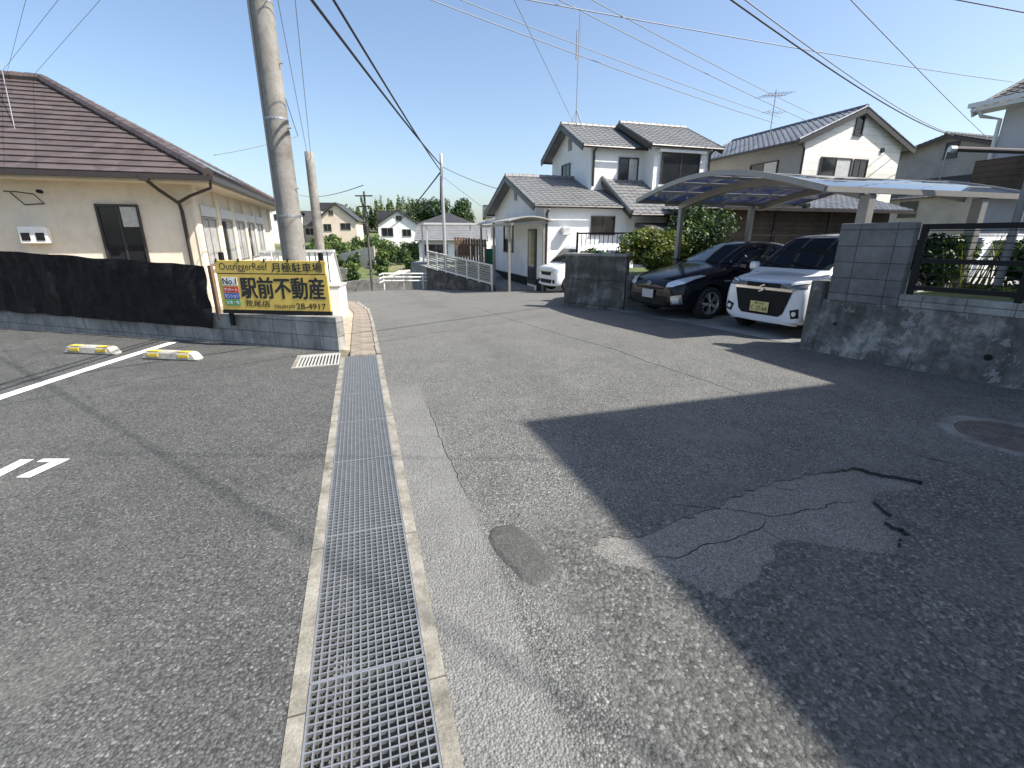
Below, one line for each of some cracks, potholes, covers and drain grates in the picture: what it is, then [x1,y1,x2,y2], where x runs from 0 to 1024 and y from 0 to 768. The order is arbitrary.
drain grate [341,371,382,395]
drain grate [309,524,424,685]
crack [426,405,473,502]
crack [642,500,862,560]
drain grate [325,455,403,538]
manhole cover [936,415,1024,456]
drain grate [296,353,341,367]
drain grate [333,418,392,463]
drain grate [338,391,387,423]
drain grate [343,355,379,374]
drain grate [300,655,442,768]
